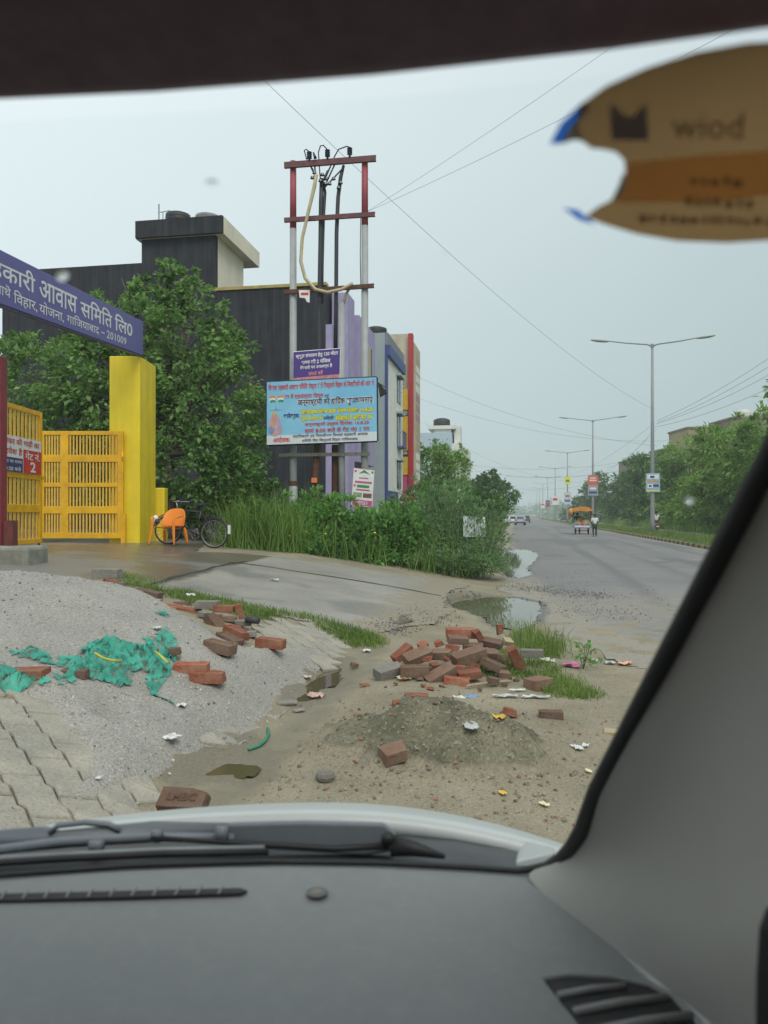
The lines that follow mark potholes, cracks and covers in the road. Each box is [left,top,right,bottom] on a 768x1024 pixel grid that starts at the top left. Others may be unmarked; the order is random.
pothole [501,549,539,578]
pothole [443,590,547,630]
